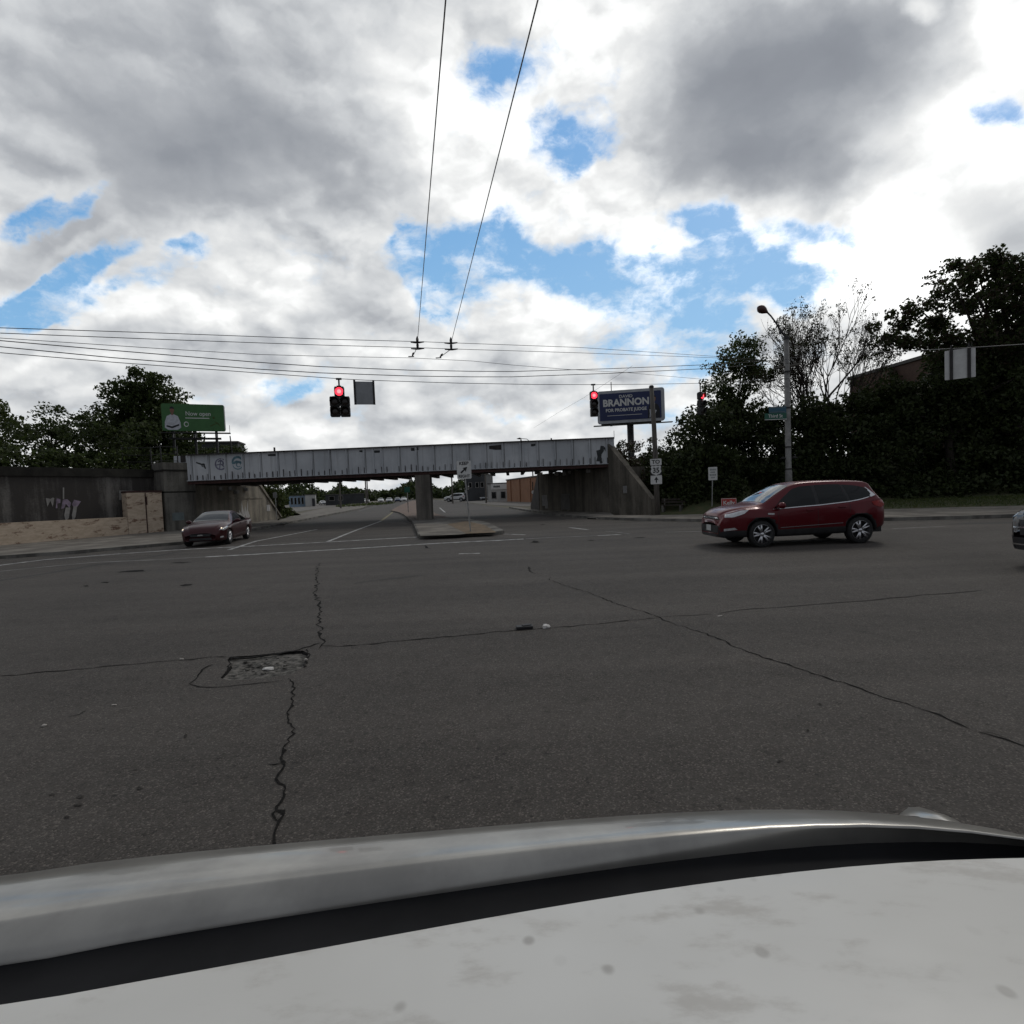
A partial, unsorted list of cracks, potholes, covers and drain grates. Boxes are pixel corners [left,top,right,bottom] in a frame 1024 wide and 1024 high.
pothole [221,650,308,680]
crack [549,579,1024,746]
crack [189,564,326,845]
